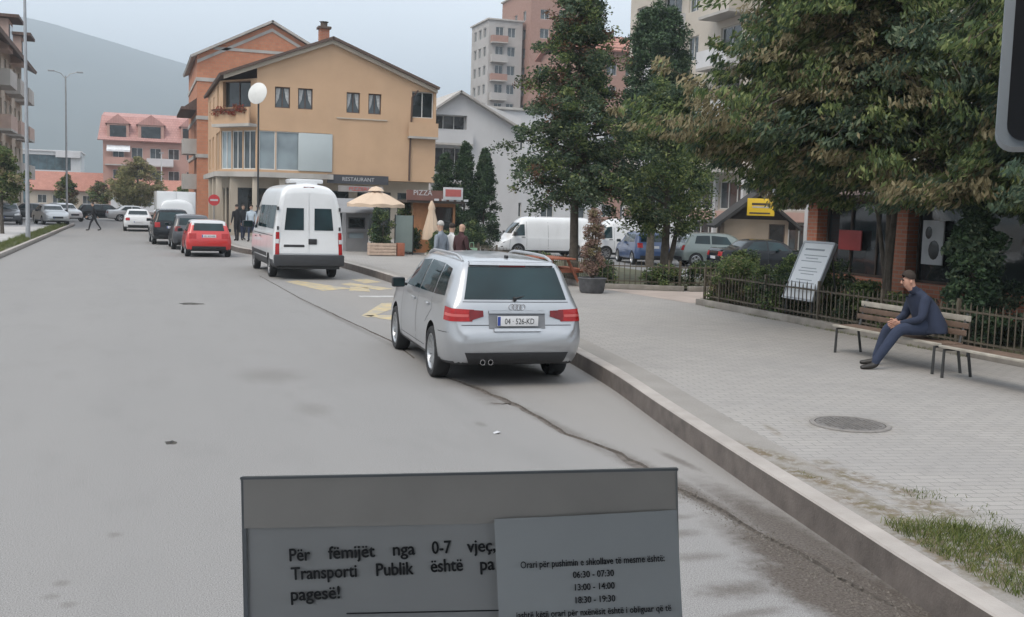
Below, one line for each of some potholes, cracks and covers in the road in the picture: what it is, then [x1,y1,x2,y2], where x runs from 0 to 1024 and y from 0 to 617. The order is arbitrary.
manhole cover [809,416,892,433]
crack [443,376,918,617]
